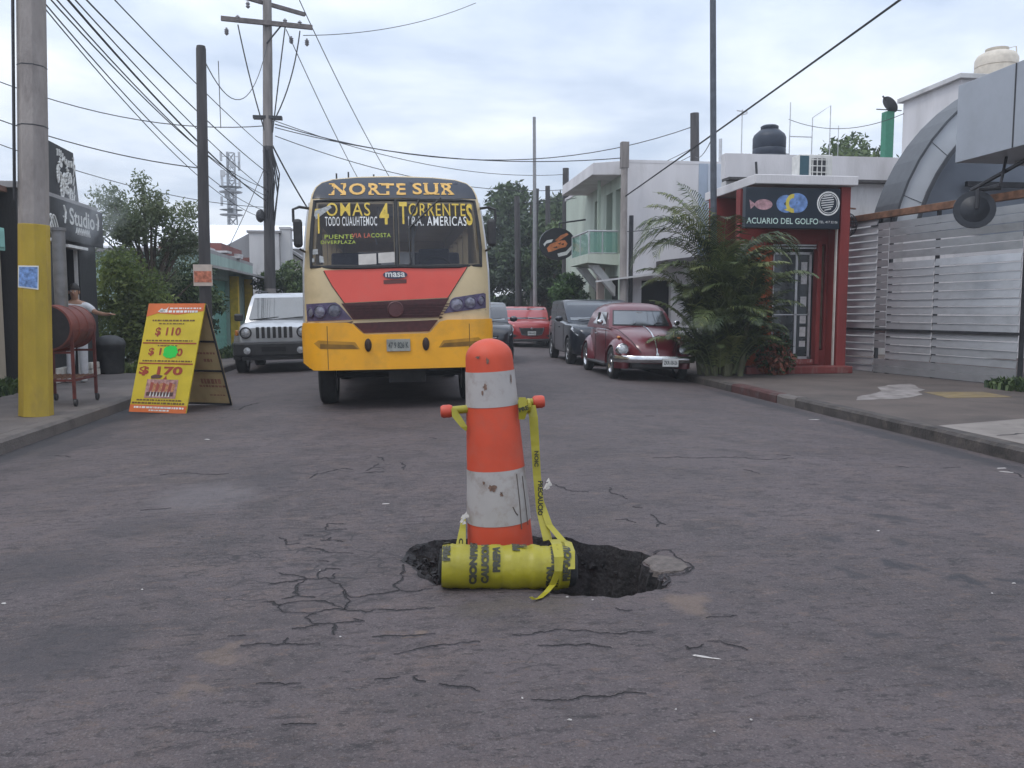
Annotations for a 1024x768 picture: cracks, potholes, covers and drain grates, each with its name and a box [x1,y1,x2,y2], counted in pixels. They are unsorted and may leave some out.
crack [654,454,791,474]
crack [374,675,480,693]
crack [531,691,647,702]
crack [511,629,653,648]
crack [227,523,480,655]
crack [310,457,406,478]
crack [608,487,666,527]
